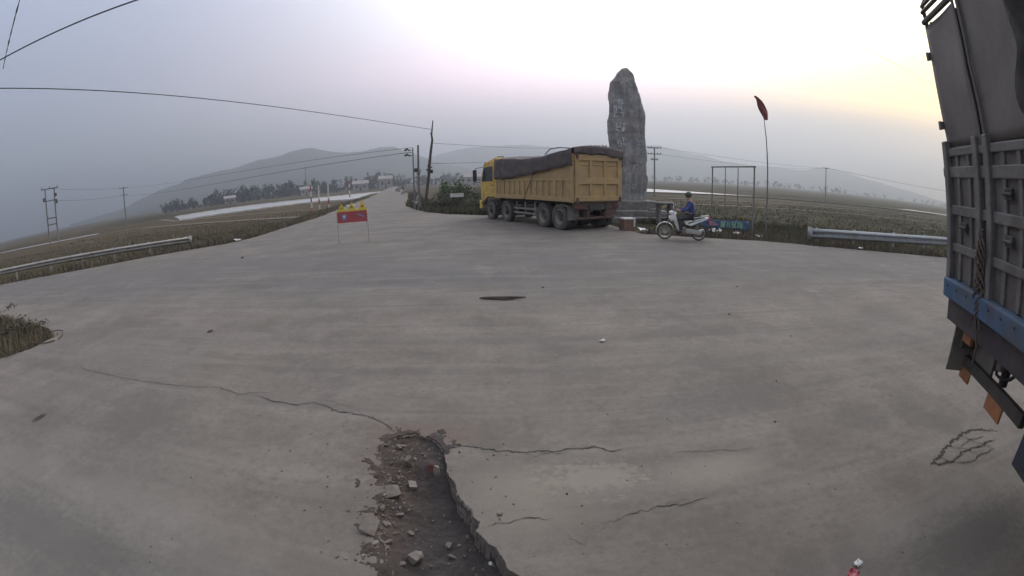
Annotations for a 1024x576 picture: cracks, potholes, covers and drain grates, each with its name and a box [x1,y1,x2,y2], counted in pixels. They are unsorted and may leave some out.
crack [450,444,620,457]
crack [601,498,704,524]
crack [80,364,396,434]
crack [931,428,996,465]
pothole [344,428,519,576]
